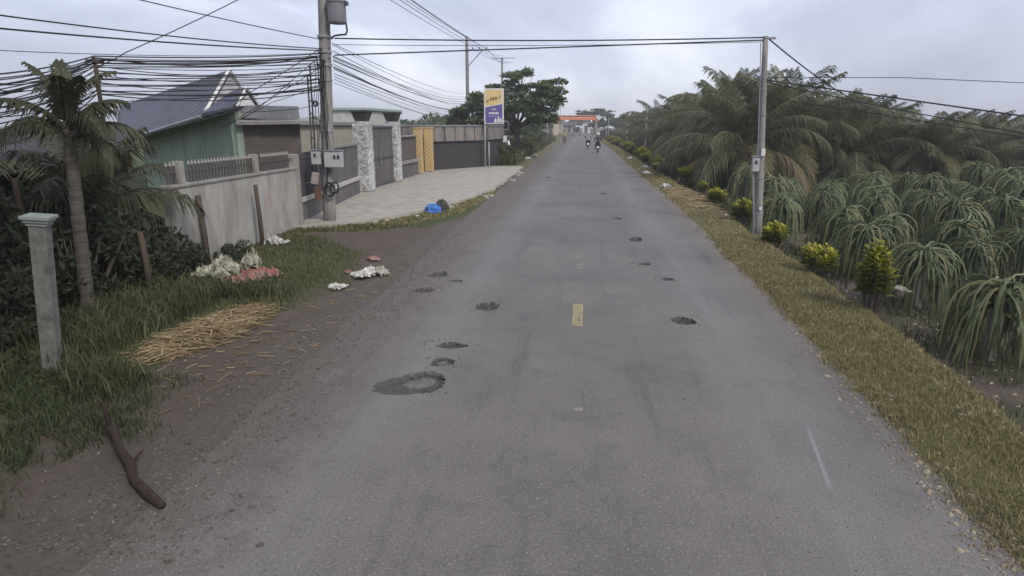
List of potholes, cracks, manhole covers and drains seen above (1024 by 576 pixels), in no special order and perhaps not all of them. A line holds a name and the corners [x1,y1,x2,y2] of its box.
pothole [372,367,468,395]
pothole [423,338,480,351]
pothole [469,300,499,316]
pothole [658,313,700,328]
pothole [418,352,462,370]
pothole [421,270,452,280]
pothole [409,285,443,296]
